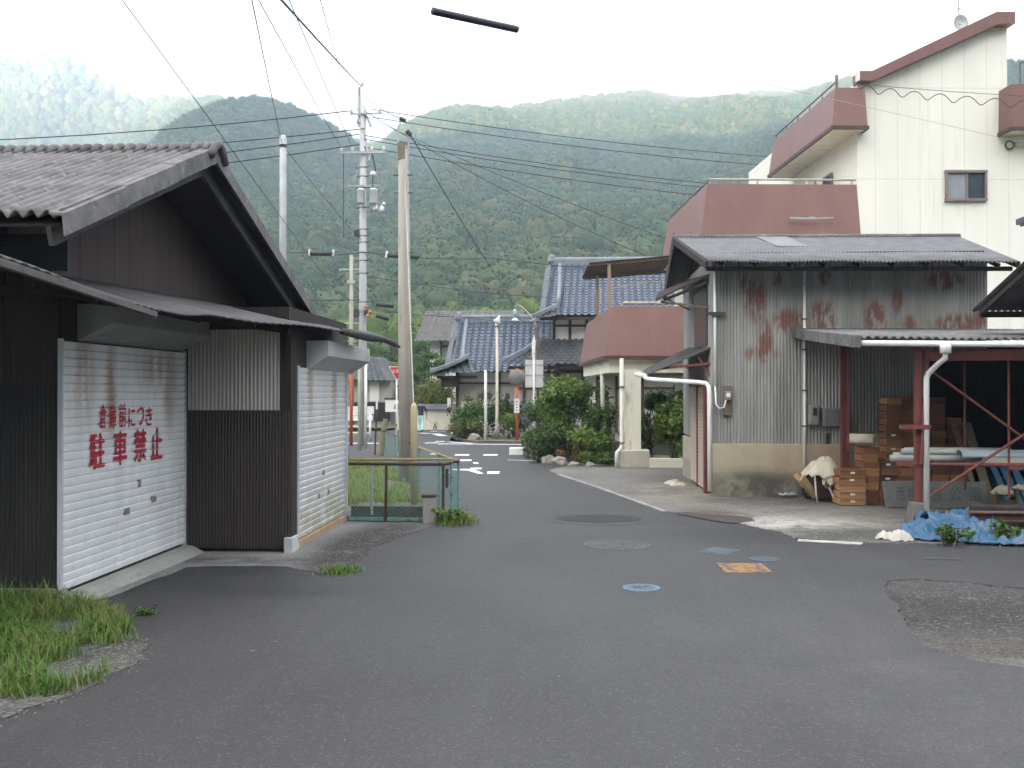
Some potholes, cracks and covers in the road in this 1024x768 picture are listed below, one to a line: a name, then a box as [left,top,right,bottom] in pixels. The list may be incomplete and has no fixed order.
utility cover [622,584,661,592]
manhole cover [583,539,651,550]
